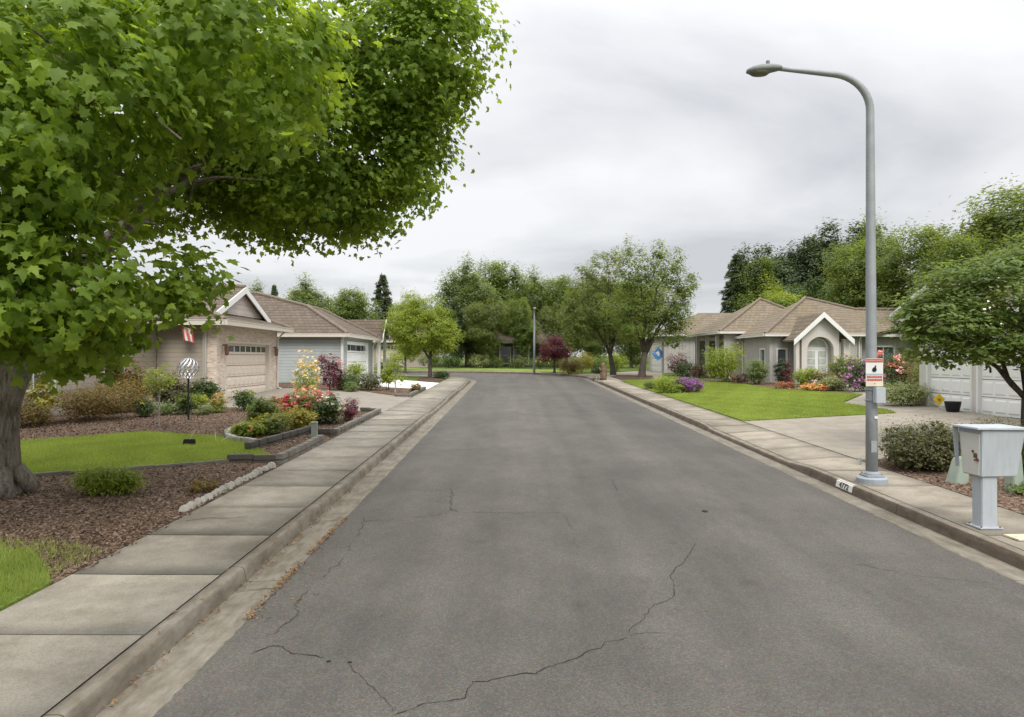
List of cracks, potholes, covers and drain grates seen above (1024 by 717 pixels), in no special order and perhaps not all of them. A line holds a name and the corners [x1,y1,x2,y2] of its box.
crack [253,489,578,658]
crack [396,543,696,714]
